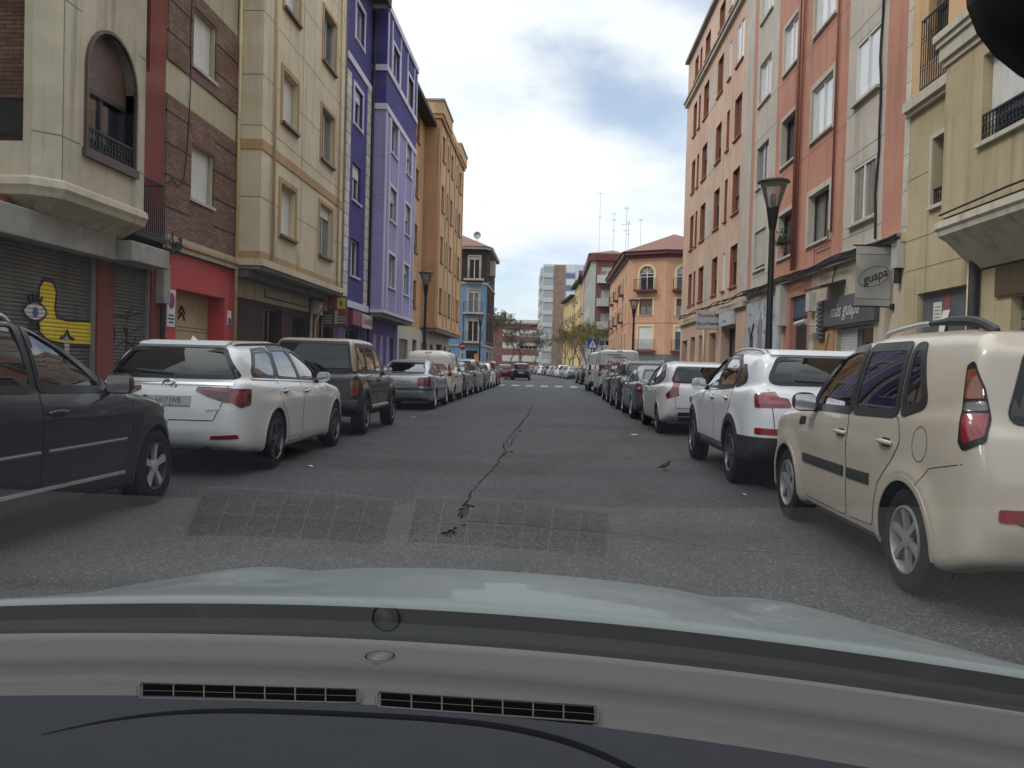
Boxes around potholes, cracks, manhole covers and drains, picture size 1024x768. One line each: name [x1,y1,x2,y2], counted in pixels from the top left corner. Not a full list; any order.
crack [441,404,829,557]
